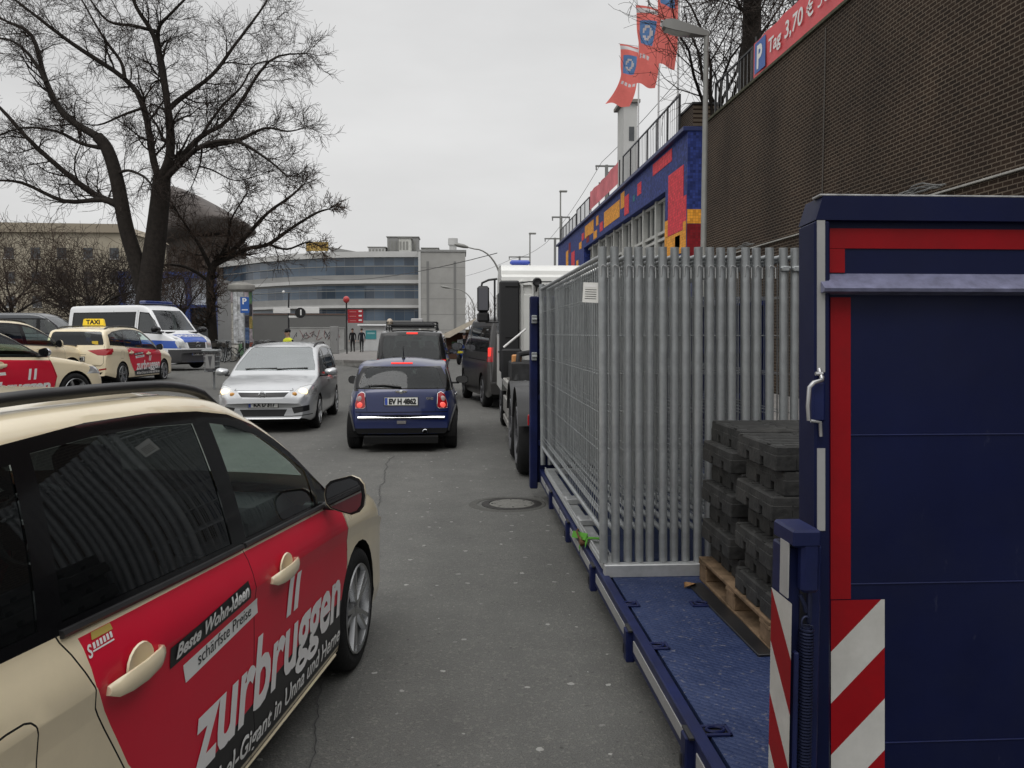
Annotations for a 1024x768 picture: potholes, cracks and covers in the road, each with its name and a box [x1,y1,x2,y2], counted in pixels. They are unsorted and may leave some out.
crack [377,456,395,506]
manhole cover [468,497,546,512]
crack [307,680,325,768]
